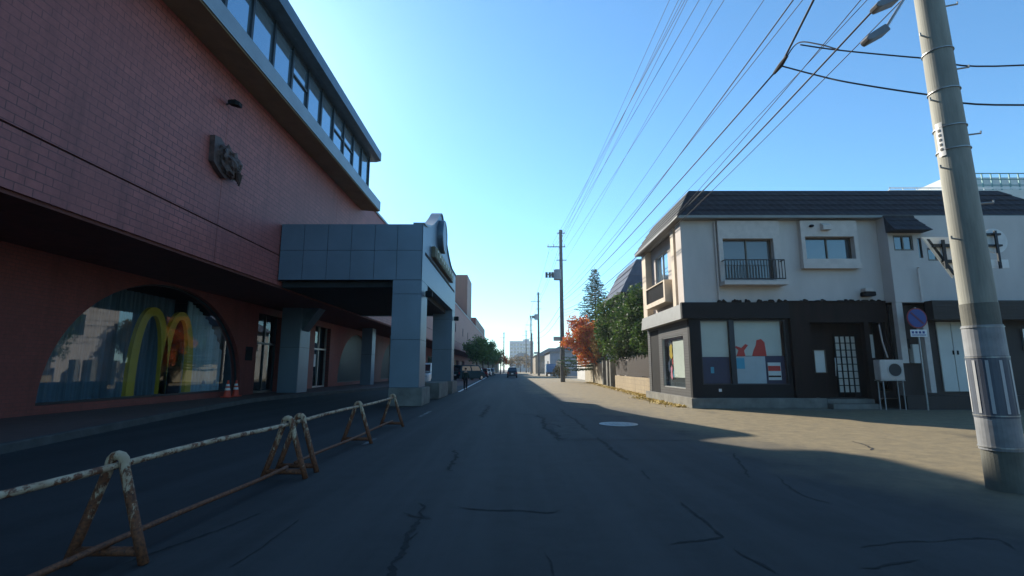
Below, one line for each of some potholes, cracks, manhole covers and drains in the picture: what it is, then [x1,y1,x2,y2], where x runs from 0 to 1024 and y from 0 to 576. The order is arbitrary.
crack [861,537,1015,569]
crack [672,502,773,571]
crack [387,503,426,576]
crack [230,519,299,567]
crack [733,453,750,478]
crack [530,414,692,441]
crack [447,450,460,471]
